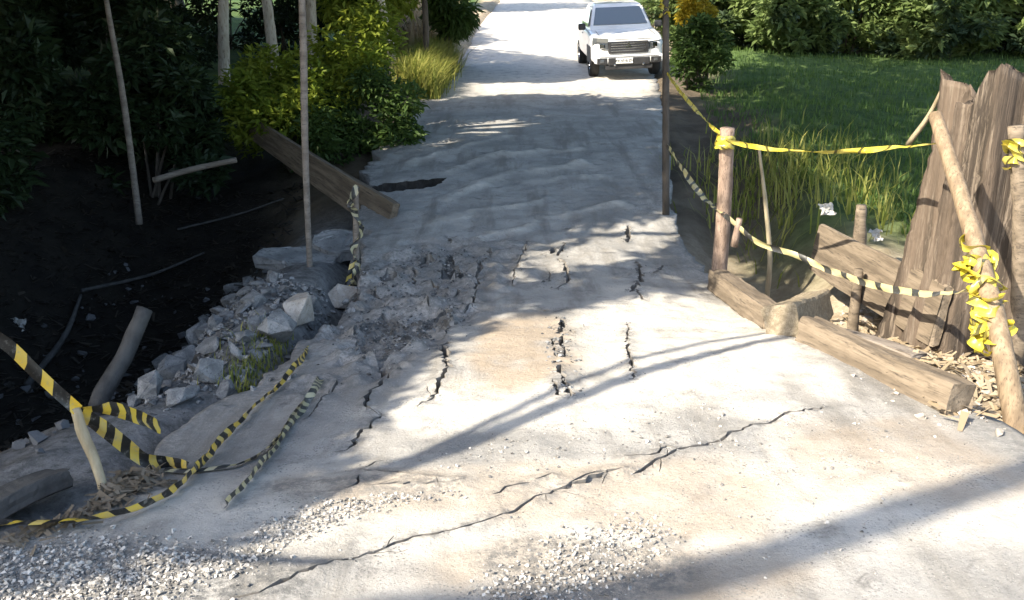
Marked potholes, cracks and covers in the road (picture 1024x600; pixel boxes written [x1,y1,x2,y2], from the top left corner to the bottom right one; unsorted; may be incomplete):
crack [231,407,823,598]
pothole [419,254,435,269]
pothole [372,178,446,192]
crack [337,371,462,488]
crack [541,309,576,397]
crack [371,236,492,405]
crack [624,324,637,379]
pothole [441,255,462,288]
pothole [381,268,397,282]
crack [624,226,670,300]
crack [512,241,571,290]
pothole [353,308,454,370]
